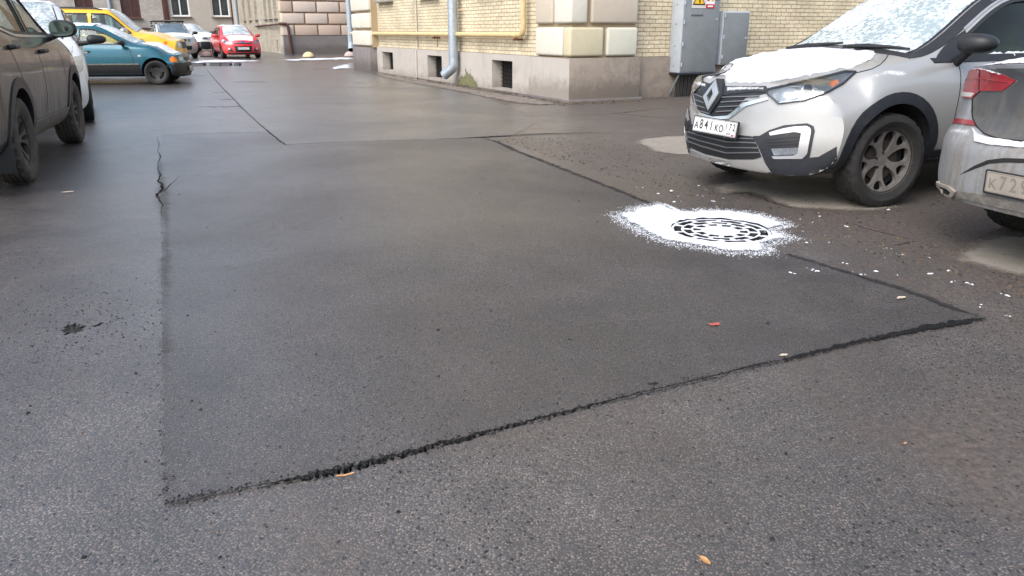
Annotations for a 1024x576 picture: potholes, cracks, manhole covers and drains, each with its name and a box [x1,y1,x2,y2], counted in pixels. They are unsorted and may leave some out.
pothole [61,322,86,335]
crack [154,139,170,214]
manhole cover [671,218,778,244]
